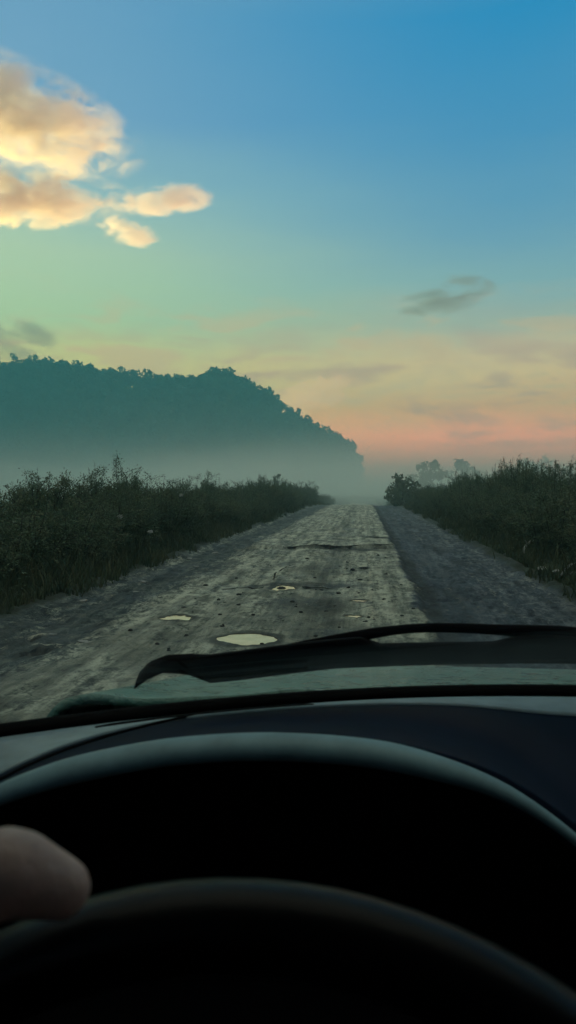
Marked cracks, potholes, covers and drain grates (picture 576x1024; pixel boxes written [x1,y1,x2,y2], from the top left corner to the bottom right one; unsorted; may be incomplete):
pothole [216,633,278,645]
crack [287,537,394,550]
